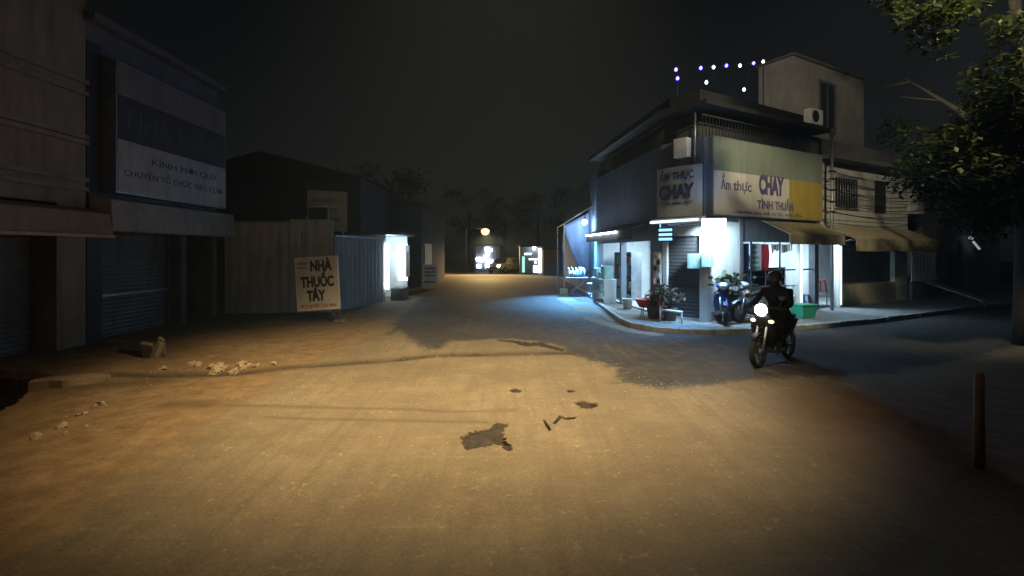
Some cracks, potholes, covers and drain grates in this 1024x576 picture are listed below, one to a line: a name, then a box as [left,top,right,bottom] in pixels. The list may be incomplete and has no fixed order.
pothole [570,400,603,410]
crack [488,338,572,354]
pothole [453,420,518,453]
crack [540,414,580,432]
